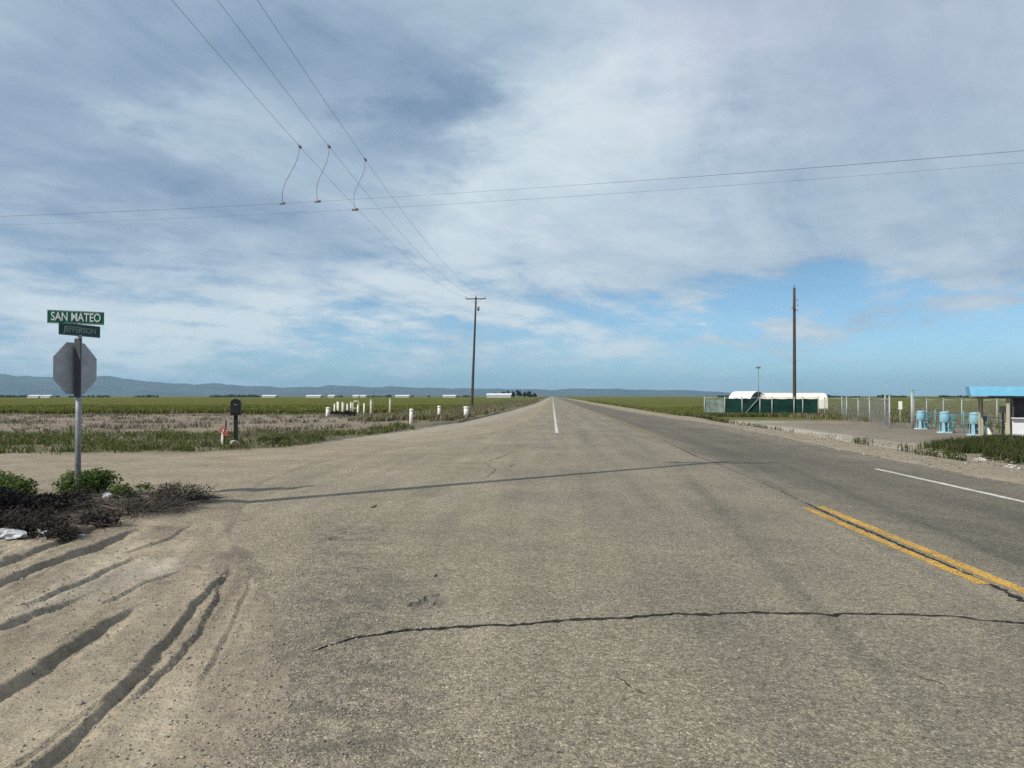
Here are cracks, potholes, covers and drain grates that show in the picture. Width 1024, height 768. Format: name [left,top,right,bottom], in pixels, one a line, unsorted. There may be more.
crack [619,677,648,695]
crack [314,611,1024,651]
pothole [406,593,454,610]
